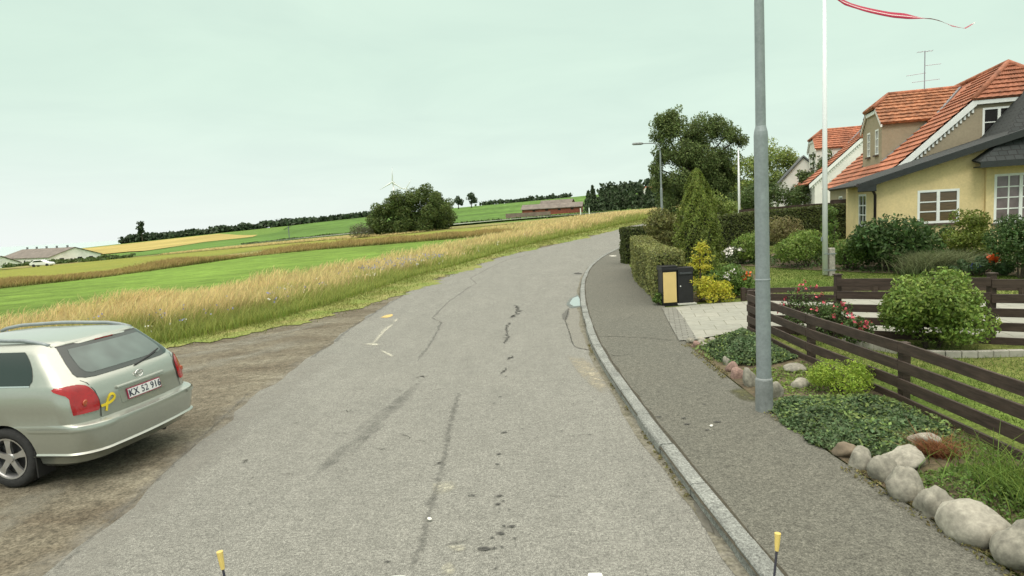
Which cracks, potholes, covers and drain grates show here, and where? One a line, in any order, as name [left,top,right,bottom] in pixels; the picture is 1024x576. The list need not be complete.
crack [501,305,521,373]
